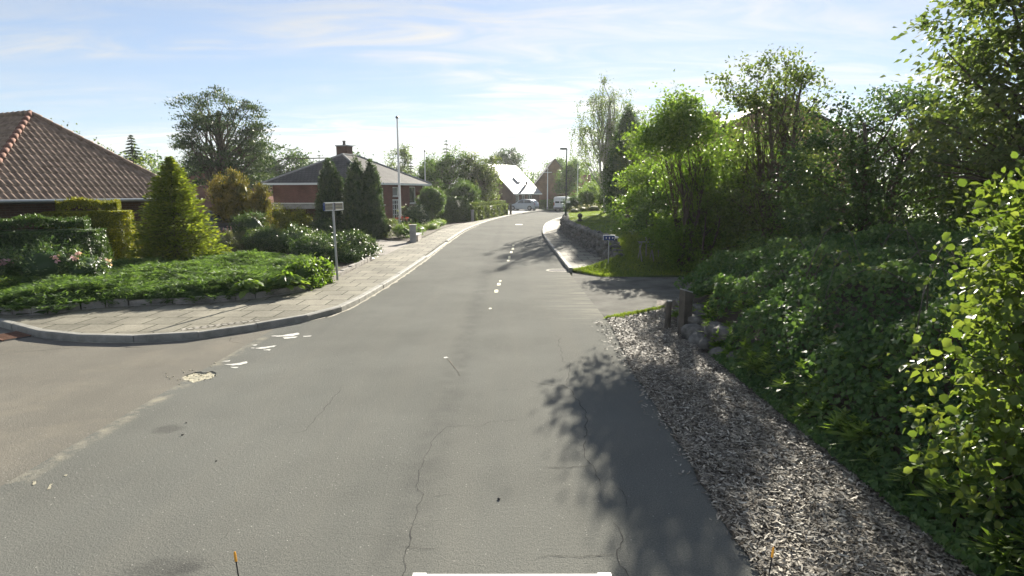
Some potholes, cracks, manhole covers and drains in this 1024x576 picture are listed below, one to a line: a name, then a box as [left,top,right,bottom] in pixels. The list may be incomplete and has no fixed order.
crack [529,336,601,484]
crack [541,489,629,576]
crack [402,419,515,576]
pothole [166,362,217,385]
